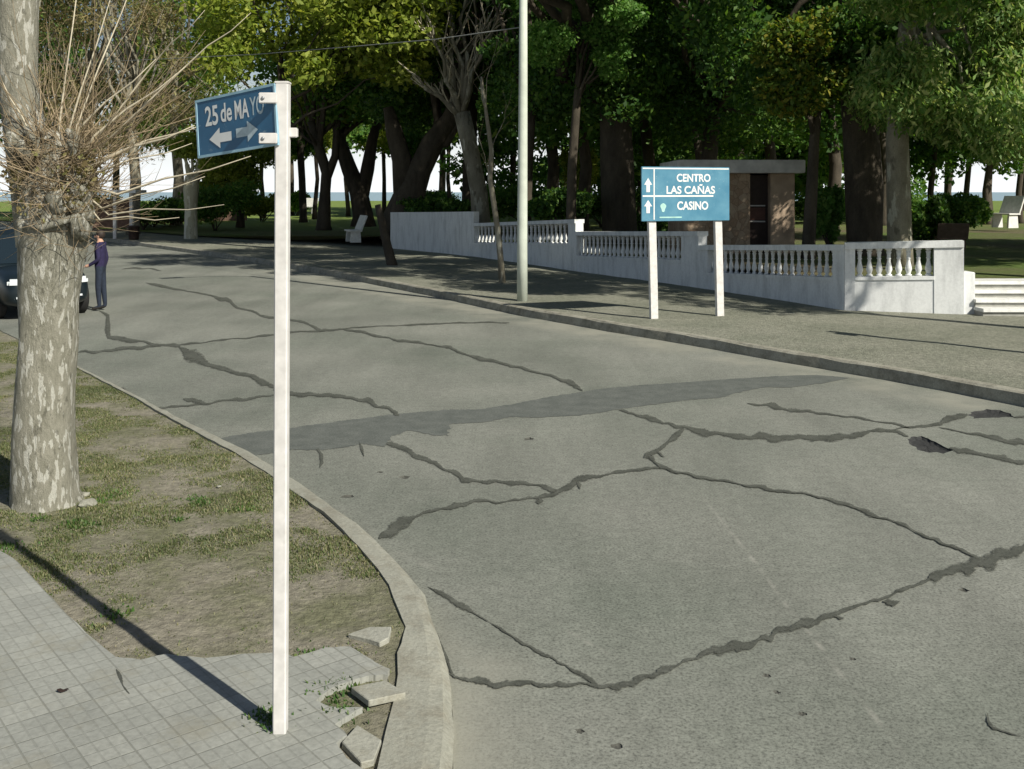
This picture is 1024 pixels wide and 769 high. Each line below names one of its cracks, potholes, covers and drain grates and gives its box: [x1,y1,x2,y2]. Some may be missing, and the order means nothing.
crack [158,394,274,409]
crack [116,669,130,694]
pothole [908,436,953,454]
pothole [968,409,1014,419]
crack [317,402,1024,691]
